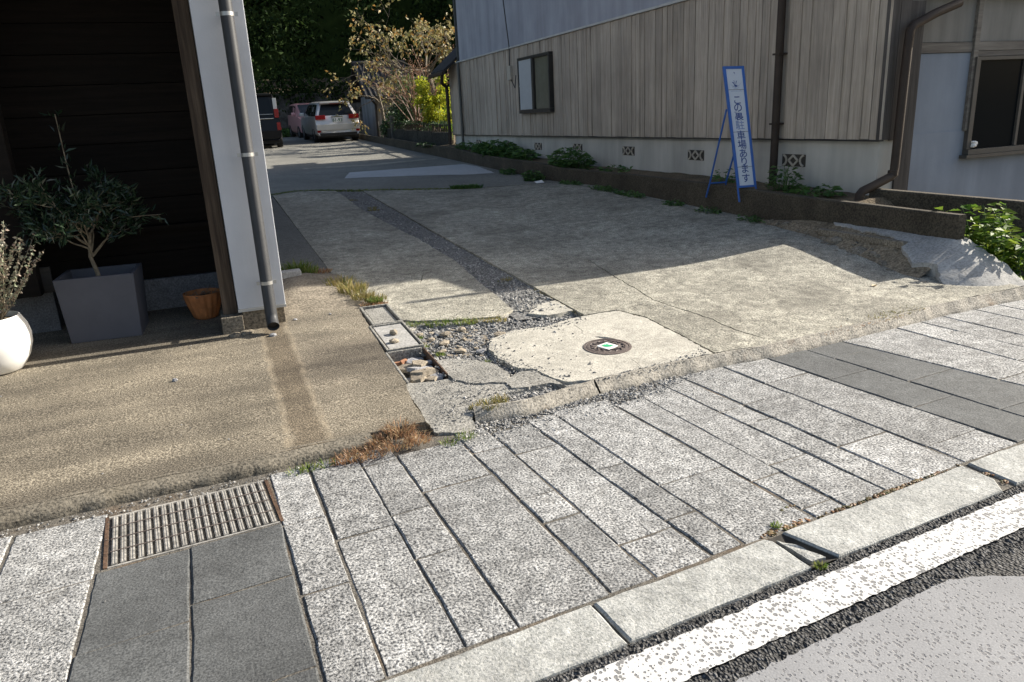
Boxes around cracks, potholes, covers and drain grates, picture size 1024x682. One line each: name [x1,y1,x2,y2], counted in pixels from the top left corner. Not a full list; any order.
pothole [385,347,448,384]
drain grate [103,479,284,570]
pothole [407,312,581,377]
manhole cover [583,339,632,355]
